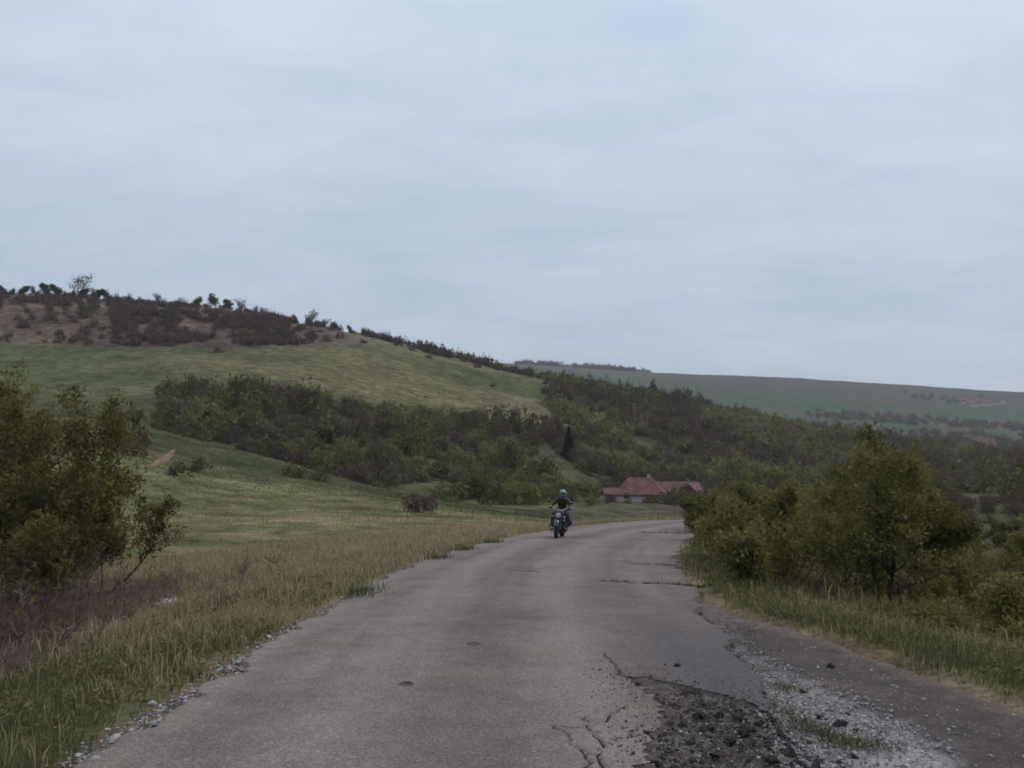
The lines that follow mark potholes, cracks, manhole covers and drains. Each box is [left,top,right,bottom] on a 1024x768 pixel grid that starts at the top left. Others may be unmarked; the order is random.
pothole [620,675,815,768]
crack [552,709,642,768]
